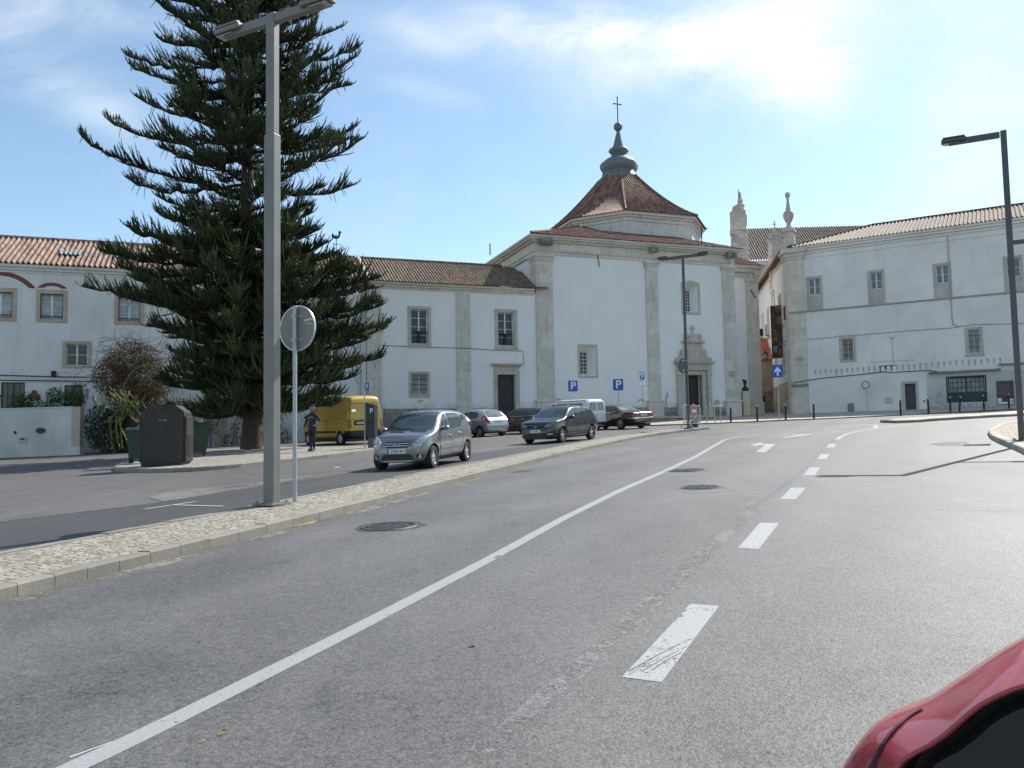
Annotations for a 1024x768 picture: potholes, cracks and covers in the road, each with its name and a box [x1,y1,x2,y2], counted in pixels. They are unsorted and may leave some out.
manhole cover [354,521,426,532]
